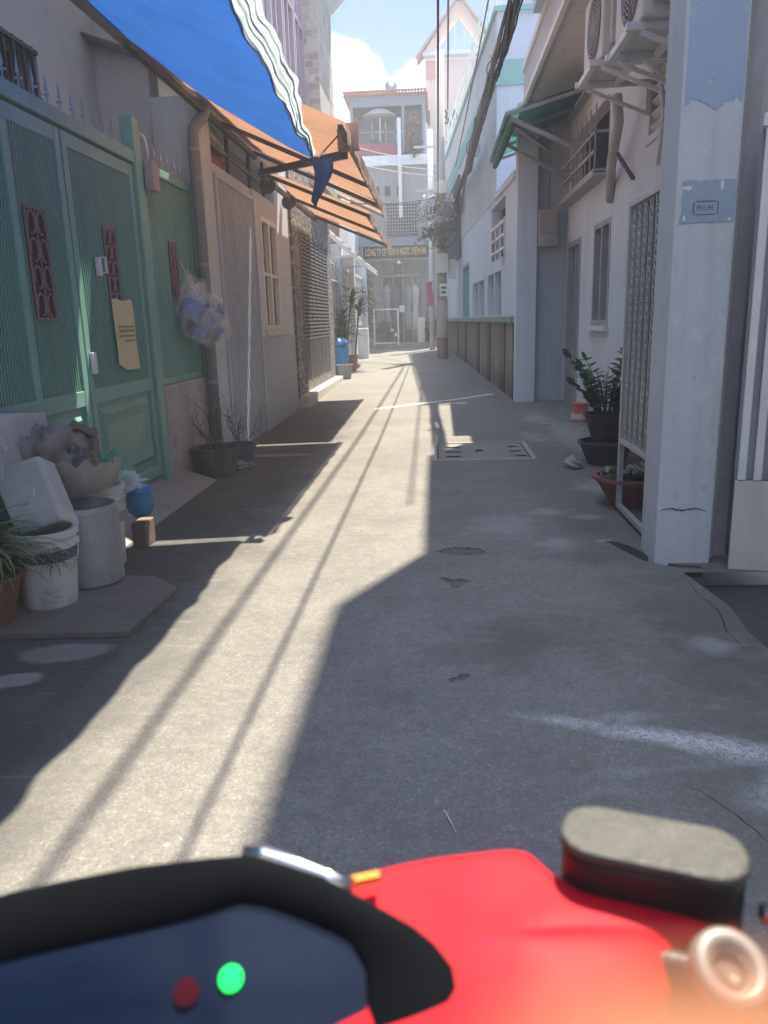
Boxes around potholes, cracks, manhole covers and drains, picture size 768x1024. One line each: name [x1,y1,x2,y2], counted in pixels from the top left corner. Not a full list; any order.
crack [679,783,768,843]
pothole [437,547,485,556]
crack [685,574,743,647]
pothole [439,577,472,589]
manhole cover [432,441,537,461]
